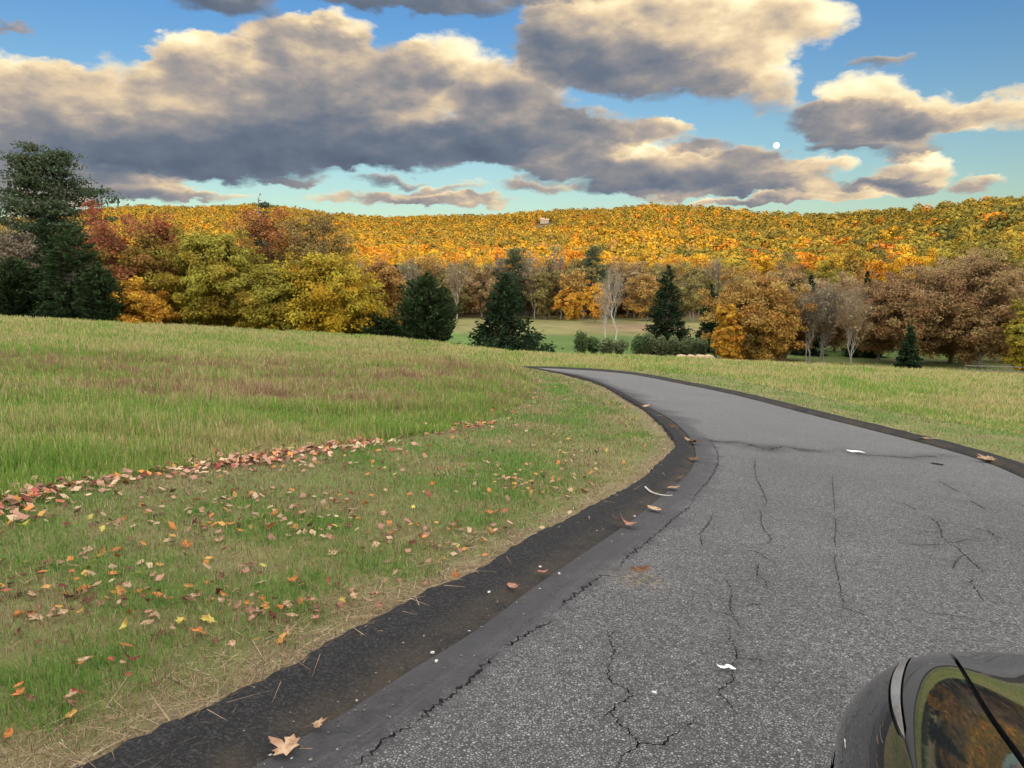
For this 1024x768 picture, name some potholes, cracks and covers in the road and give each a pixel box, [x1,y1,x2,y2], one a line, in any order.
crack [356,440,933,765]
crack [832,477,1018,630]
